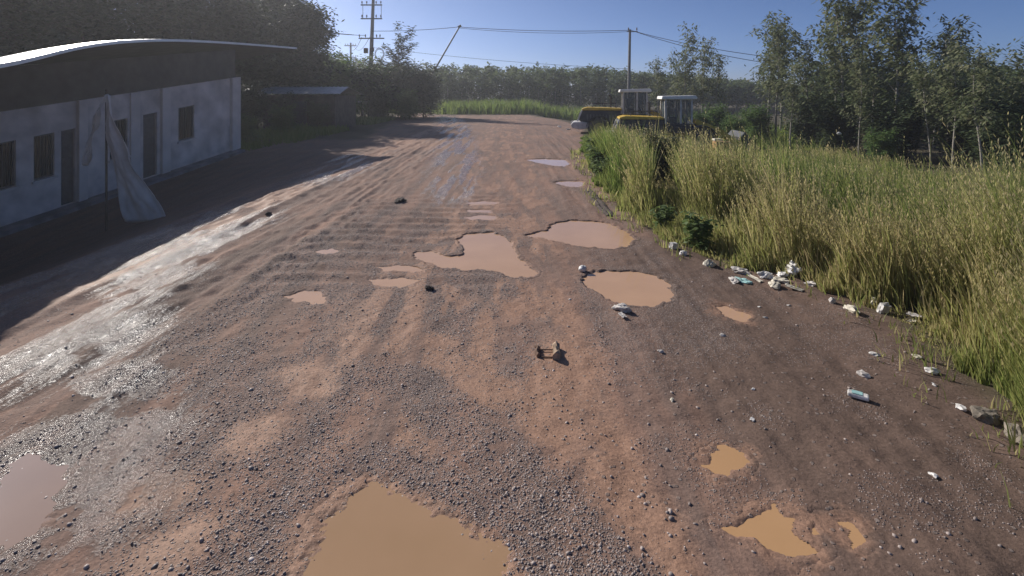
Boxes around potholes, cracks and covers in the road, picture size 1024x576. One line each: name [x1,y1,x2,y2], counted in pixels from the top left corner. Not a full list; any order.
pothole [519,218,642,250]
pothole [707,498,852,575]
pothole [689,439,760,482]
pothole [277,466,528,576]
pothole [0,445,80,558]
pothole [522,158,574,167]
pothole [572,268,682,309]
pothole [550,180,588,188]
pothole [408,230,542,280]
